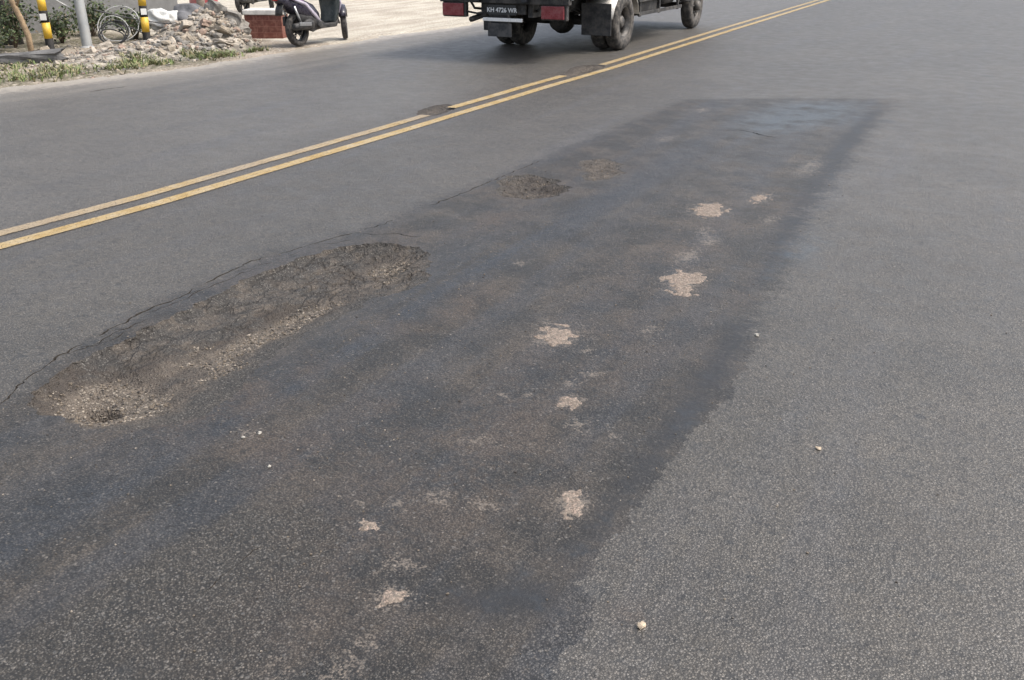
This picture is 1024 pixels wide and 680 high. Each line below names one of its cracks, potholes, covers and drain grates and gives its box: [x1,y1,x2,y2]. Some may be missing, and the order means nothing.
pothole [495,174,572,200]
crack [432,159,544,205]
pothole [27,242,433,431]
pothole [575,158,626,181]
crack [0,220,417,404]
